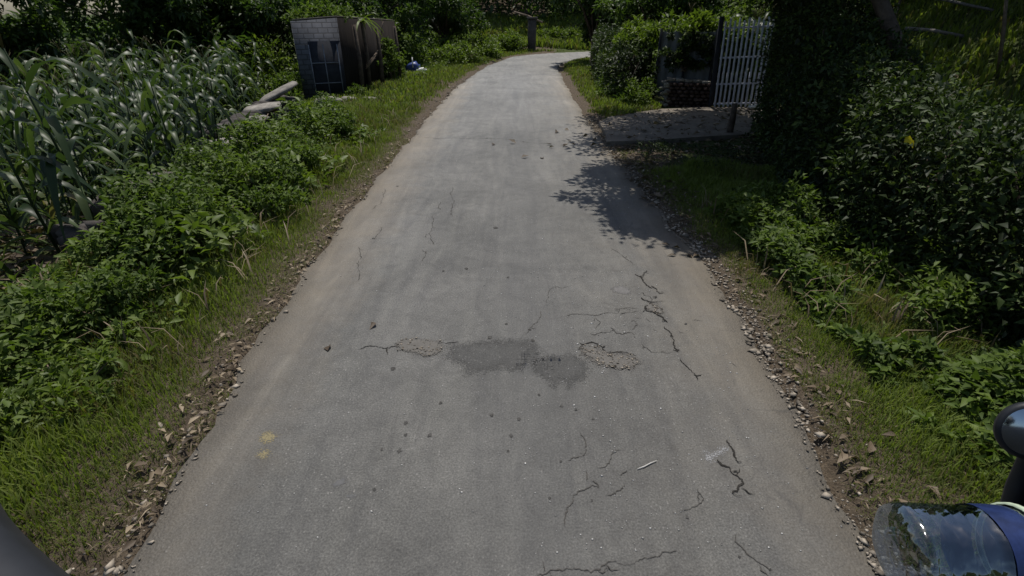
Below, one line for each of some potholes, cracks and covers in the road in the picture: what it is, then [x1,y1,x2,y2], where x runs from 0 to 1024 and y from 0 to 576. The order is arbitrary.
pothole [578,344,643,371]
crack [564,434,627,526]
crack [684,440,752,510]
crack [735,534,772,574]
pothole [394,337,445,357]
crack [535,551,678,576]
crack [567,249,702,380]
